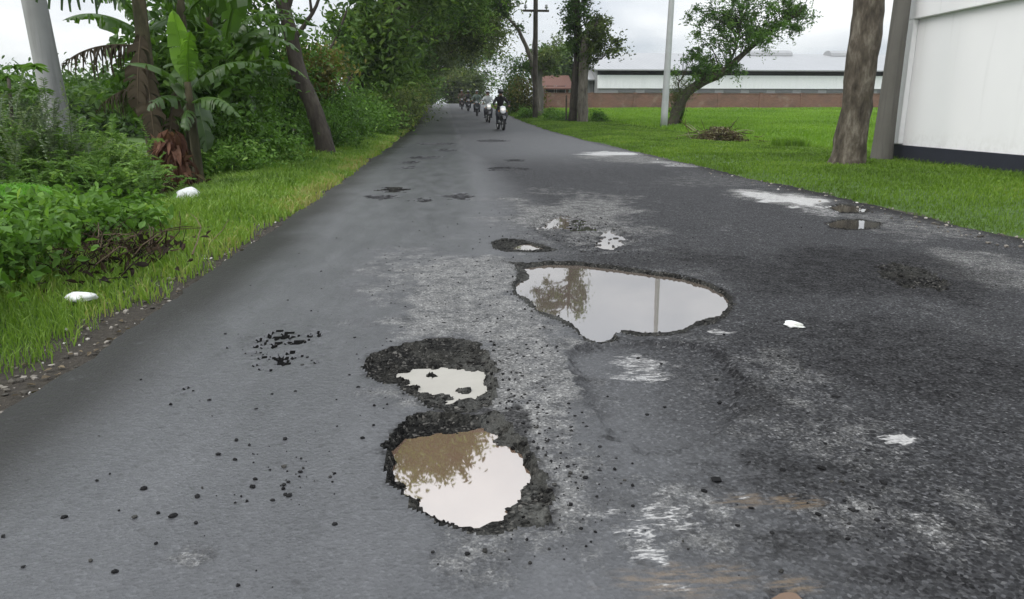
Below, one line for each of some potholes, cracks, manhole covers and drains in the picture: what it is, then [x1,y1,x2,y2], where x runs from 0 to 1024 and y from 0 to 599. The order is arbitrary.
pothole [380,410,556,535]
pothole [360,337,501,414]
pothole [874,262,952,292]
pothole [491,238,558,253]
pothole [508,261,737,344]
pothole [825,218,884,231]
pothole [530,214,637,255]
